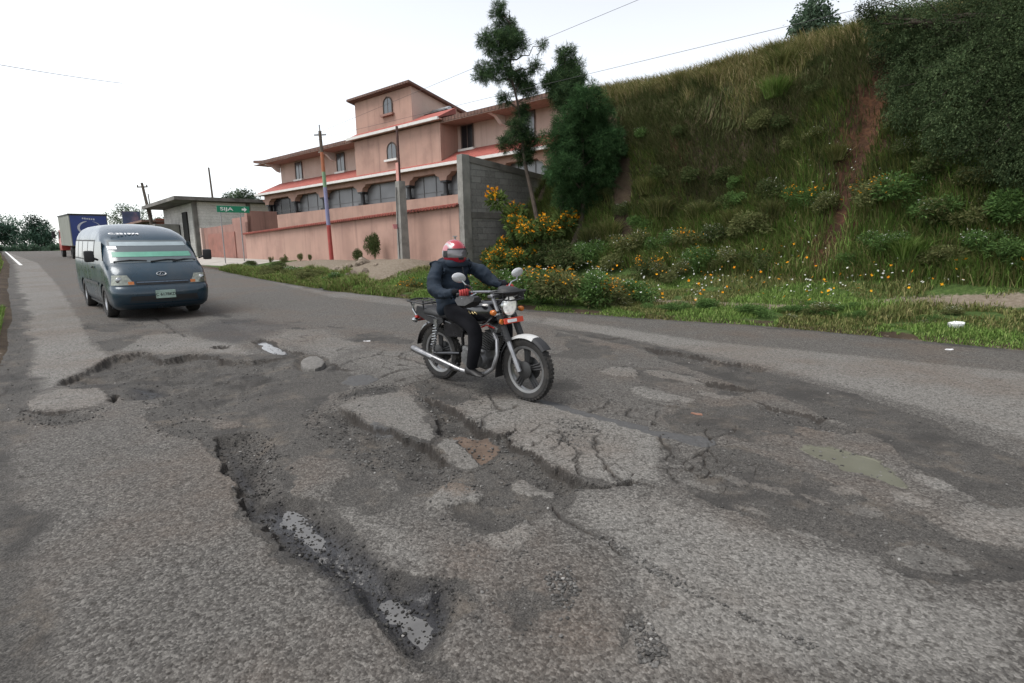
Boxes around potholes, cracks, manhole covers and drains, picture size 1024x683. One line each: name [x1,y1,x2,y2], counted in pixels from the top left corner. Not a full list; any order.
pothole [254,338,306,356]
pothole [803,447,905,488]
crack [476,388,783,497]
pothole [58,352,292,415]
pothole [316,408,453,482]
pothole [213,431,456,650]
